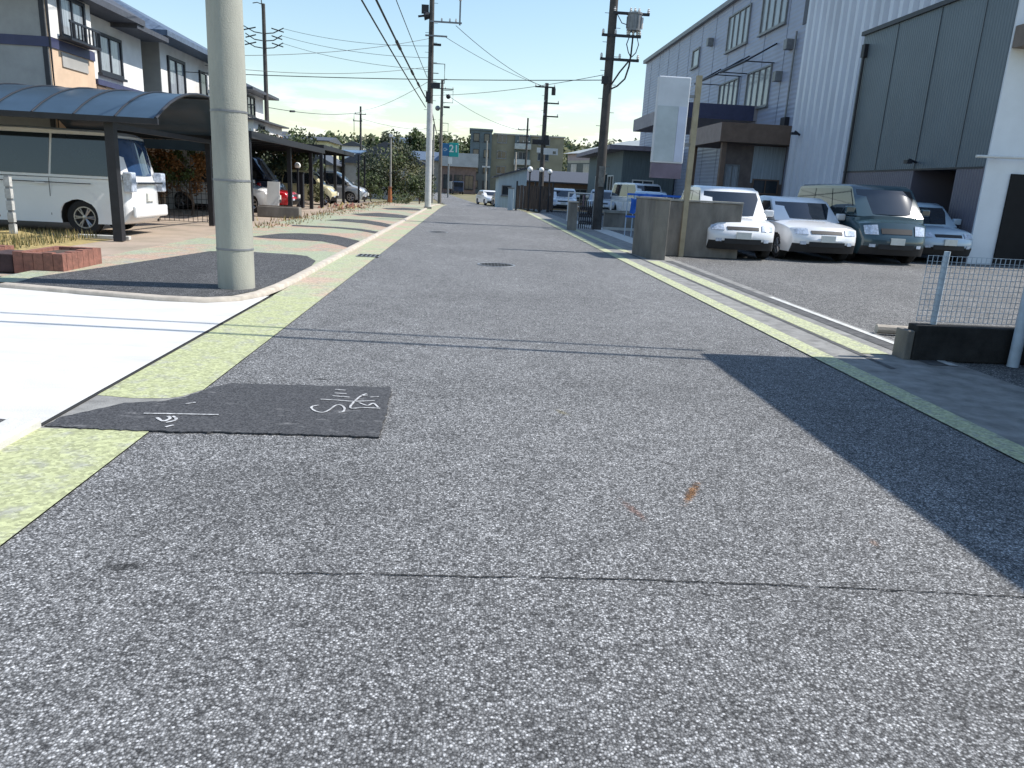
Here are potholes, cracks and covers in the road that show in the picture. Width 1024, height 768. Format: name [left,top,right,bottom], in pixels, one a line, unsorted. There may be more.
crack [168,570,1024,597]
